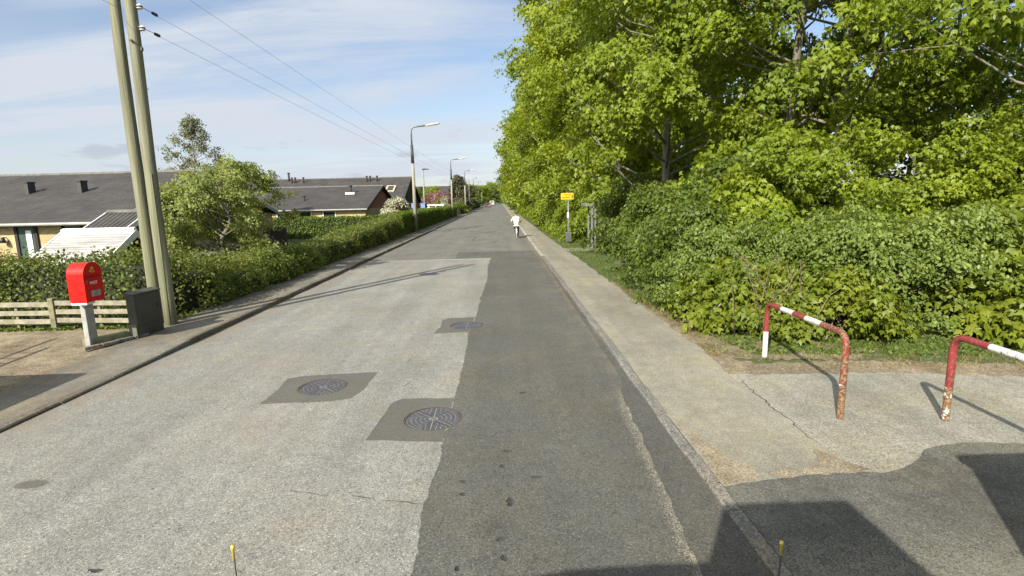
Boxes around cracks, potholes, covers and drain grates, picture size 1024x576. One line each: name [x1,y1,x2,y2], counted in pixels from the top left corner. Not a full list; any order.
manhole cover [403,407,463,431]
crack [290,490,415,504]
manhole cover [450,321,484,329]
manhole cover [297,378,348,395]
